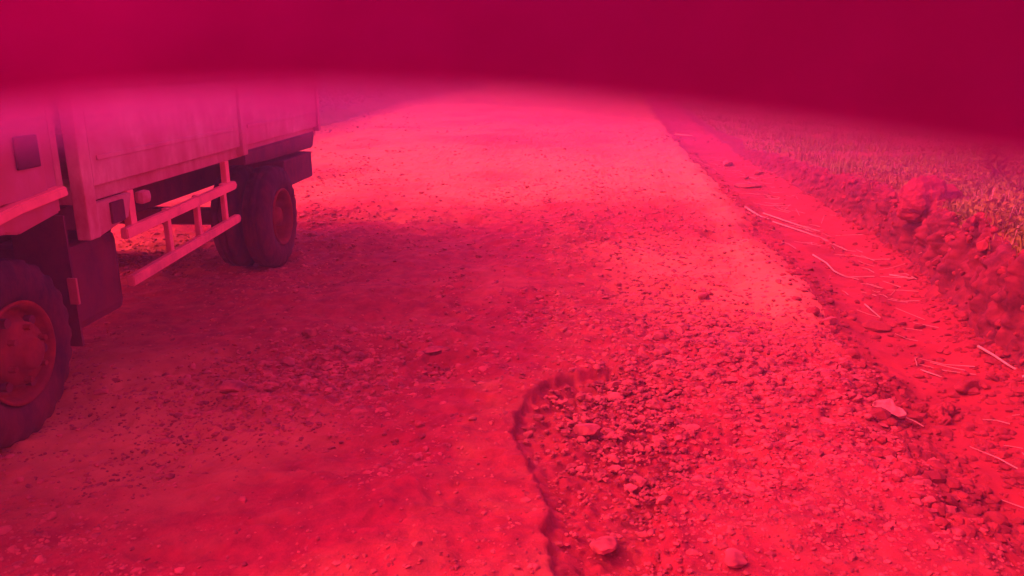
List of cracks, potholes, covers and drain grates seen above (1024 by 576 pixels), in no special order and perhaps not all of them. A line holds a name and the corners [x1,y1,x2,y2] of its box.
pothole [513,367,742,576]
